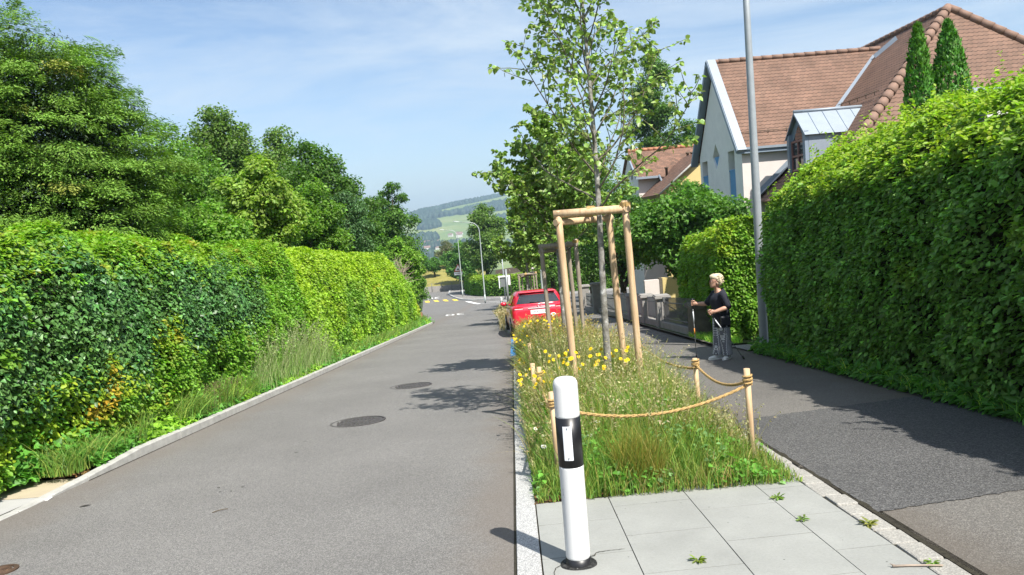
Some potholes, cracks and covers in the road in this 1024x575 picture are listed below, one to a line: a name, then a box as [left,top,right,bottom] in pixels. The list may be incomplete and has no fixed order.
manhole cover [0,564,20,575]
manhole cover [330,416,386,427]
